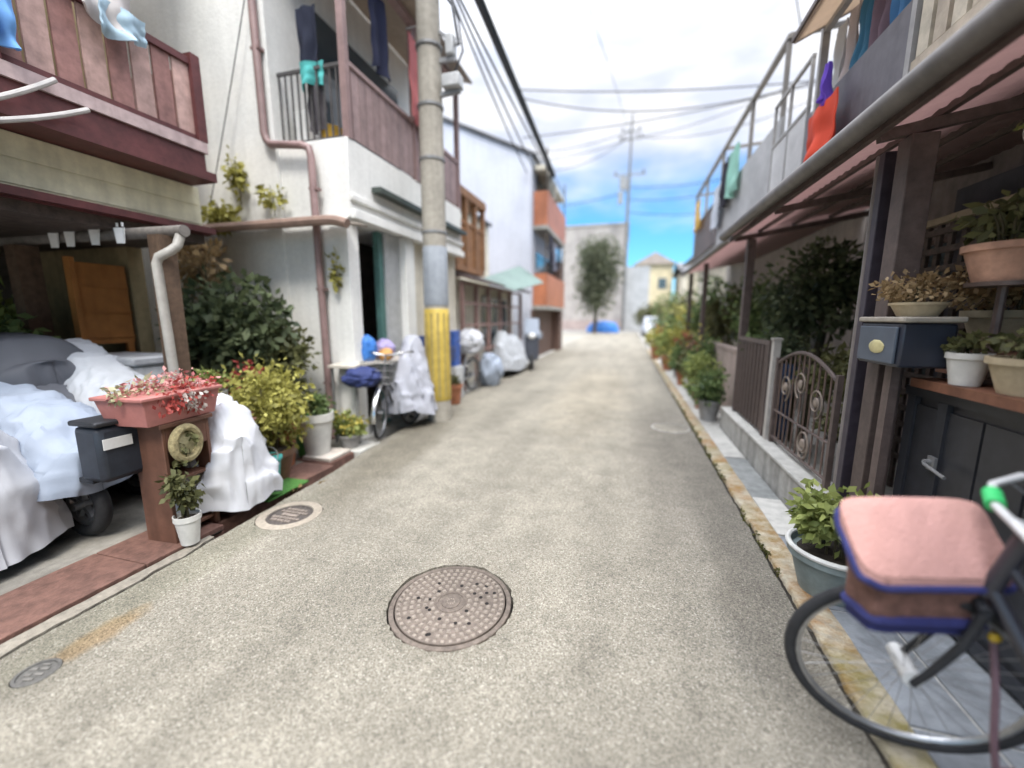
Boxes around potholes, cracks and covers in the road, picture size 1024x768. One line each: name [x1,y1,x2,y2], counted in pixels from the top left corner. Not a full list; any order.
utility cover [10,658,63,688]
manhole cover [387,566,513,652]
manhole cover [651,423,690,433]
manhole cover [255,501,323,530]
